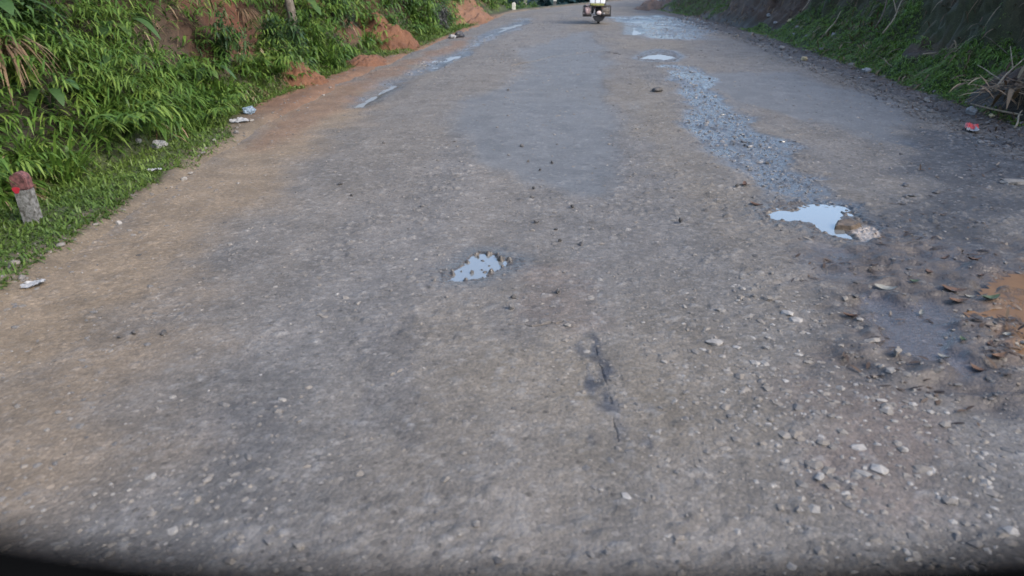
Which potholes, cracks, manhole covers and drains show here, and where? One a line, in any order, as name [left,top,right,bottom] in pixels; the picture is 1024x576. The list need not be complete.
pothole [420,244,539,291]
pothole [742,195,910,248]
pothole [620,48,698,64]
